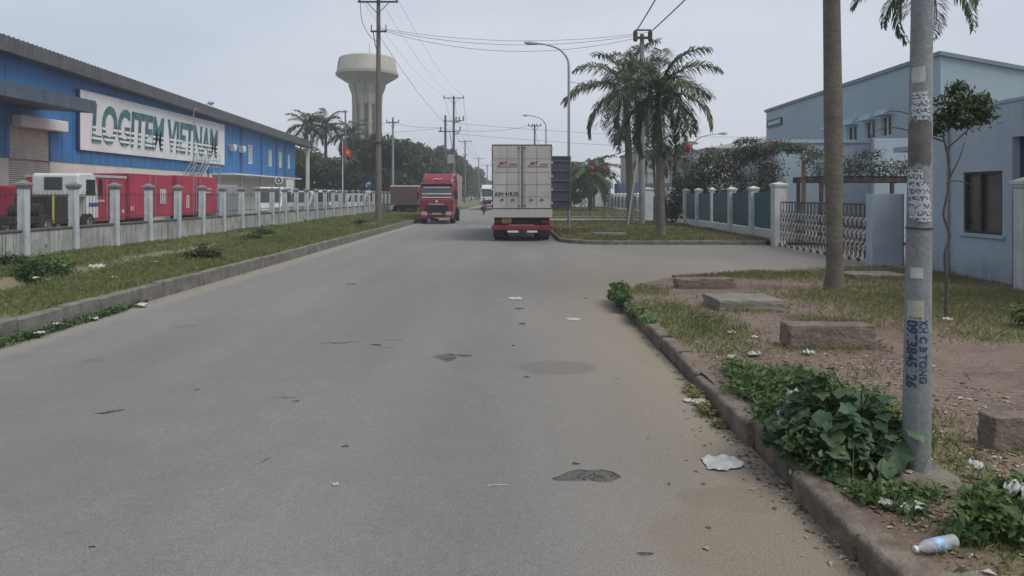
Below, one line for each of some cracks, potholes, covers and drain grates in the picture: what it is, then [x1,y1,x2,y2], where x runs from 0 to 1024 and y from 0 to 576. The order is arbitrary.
pothole [552,469,622,482]
pothole [432,353,473,362]
